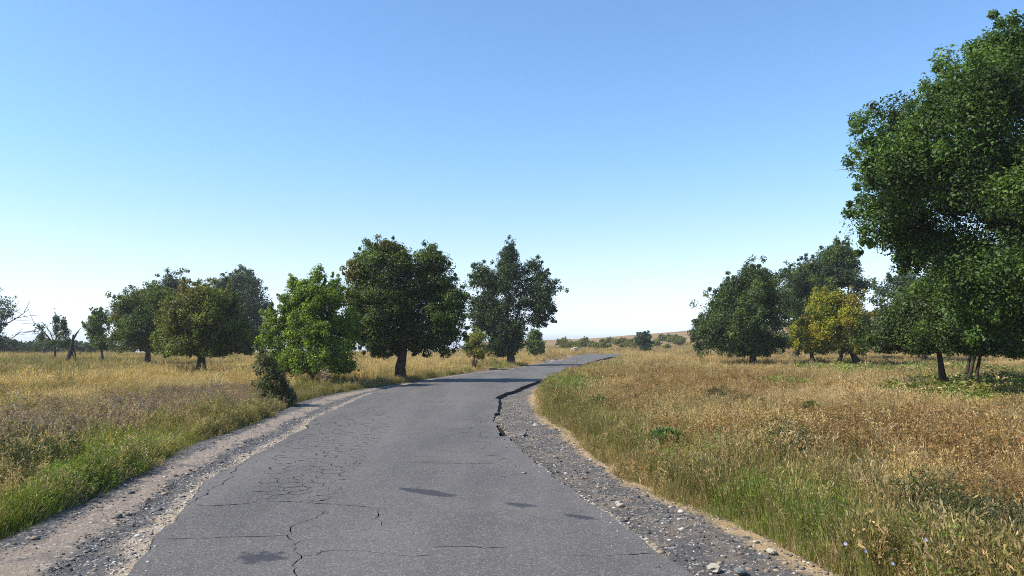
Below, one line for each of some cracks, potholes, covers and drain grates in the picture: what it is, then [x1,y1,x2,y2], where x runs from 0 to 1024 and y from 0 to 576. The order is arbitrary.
crack [195,408,426,576]
